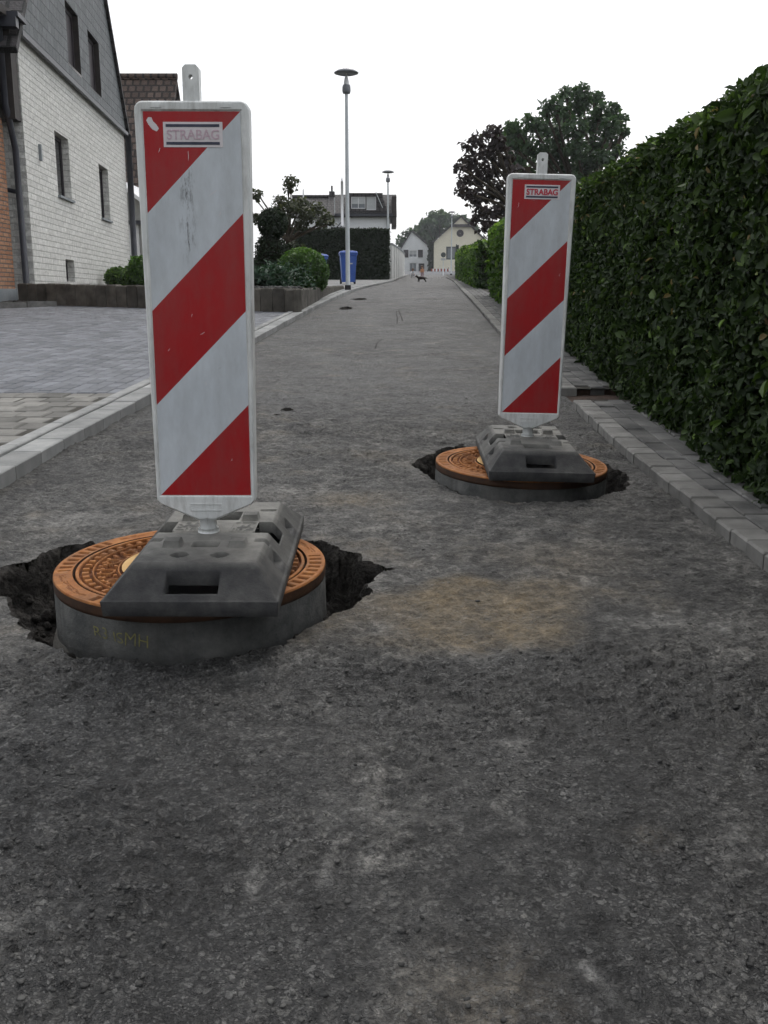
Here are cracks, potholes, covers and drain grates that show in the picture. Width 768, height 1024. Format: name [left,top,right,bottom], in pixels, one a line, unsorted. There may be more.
manhole cover [53,531,328,666]
manhole cover [435,446,607,503]
